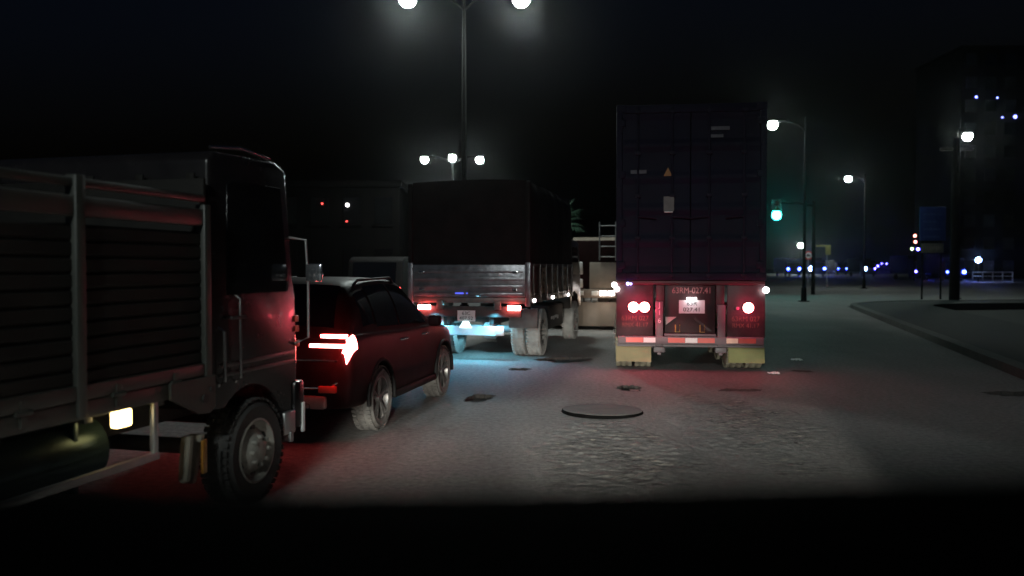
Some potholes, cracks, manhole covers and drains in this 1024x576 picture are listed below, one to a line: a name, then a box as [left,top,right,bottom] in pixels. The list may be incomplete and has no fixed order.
manhole cover [561,404,643,419]
pothole [463,394,496,403]
